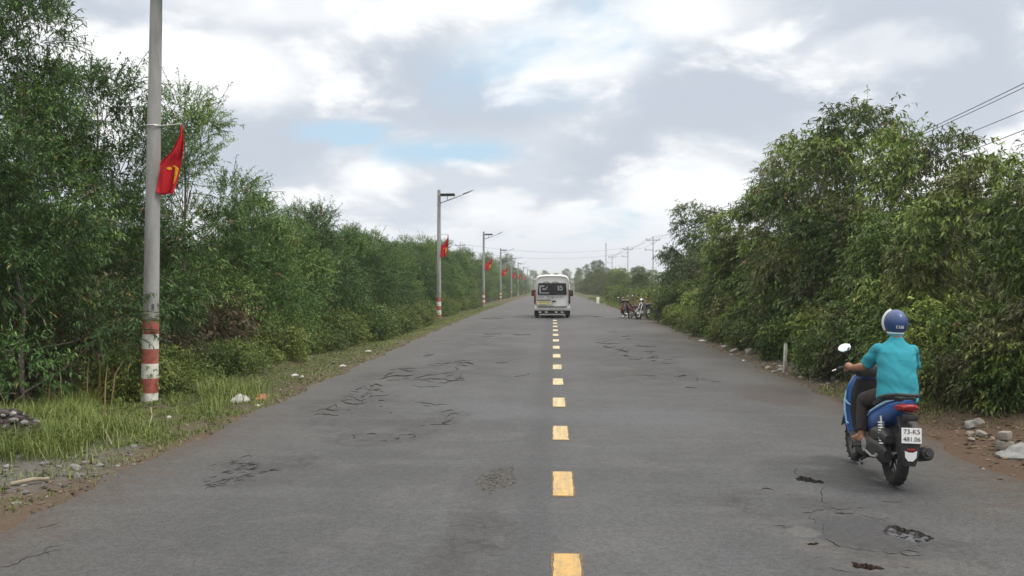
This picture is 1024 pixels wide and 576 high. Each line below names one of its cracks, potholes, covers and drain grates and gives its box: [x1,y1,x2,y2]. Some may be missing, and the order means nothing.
crack [775,468,920,573]
pothole [795,476,824,484]
crack [204,455,280,488]
pothole [851,562,885,570]
crack [5,546,57,567]
crack [596,336,718,388]
pothole [883,525,934,543]
crack [314,354,473,439]
